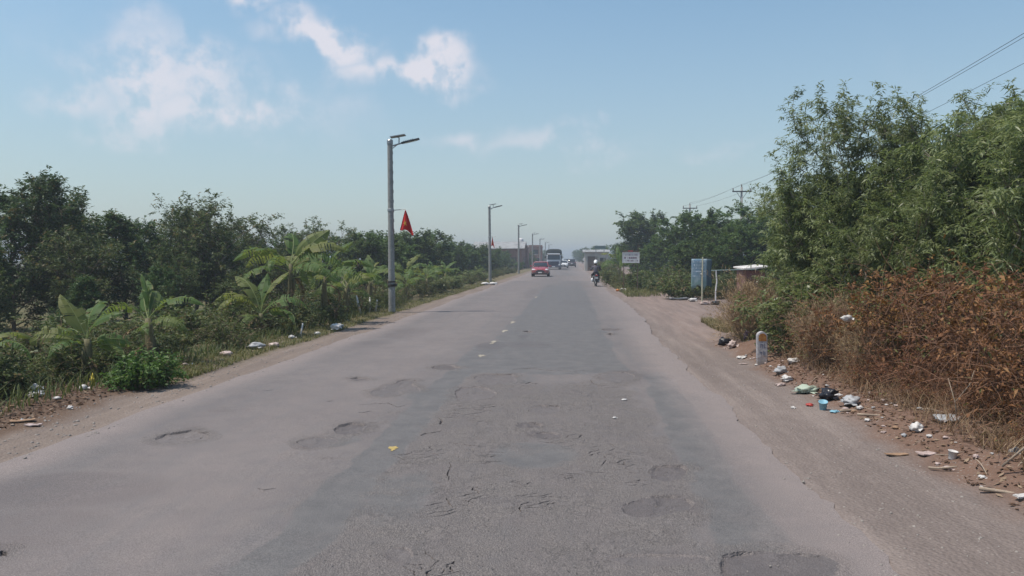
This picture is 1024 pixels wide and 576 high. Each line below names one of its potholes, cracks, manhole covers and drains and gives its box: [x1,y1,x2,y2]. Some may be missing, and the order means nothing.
crack [393,403,503,517]
pothole [370,379,420,397]
pothole [155,430,210,443]
crack [402,551,463,576]
pothole [454,387,497,401]
crack [510,434,647,512]
pothole [719,551,840,576]
pothole [648,464,688,481]
pothole [621,495,695,518]
pothole [333,422,367,435]
